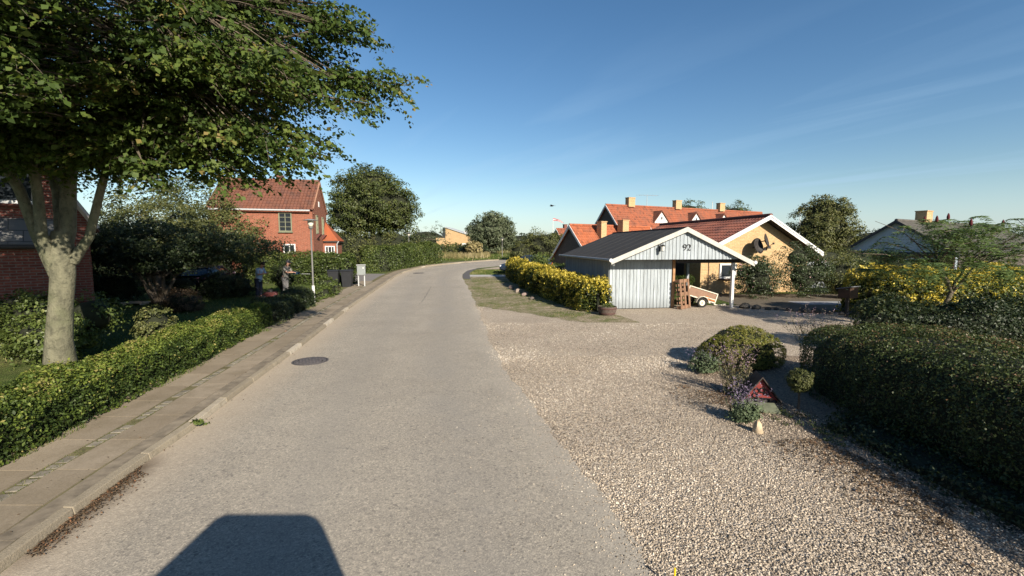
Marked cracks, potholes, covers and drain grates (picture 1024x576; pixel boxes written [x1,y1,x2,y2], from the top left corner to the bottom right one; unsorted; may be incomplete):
manhole cover [291,357,329,366]
